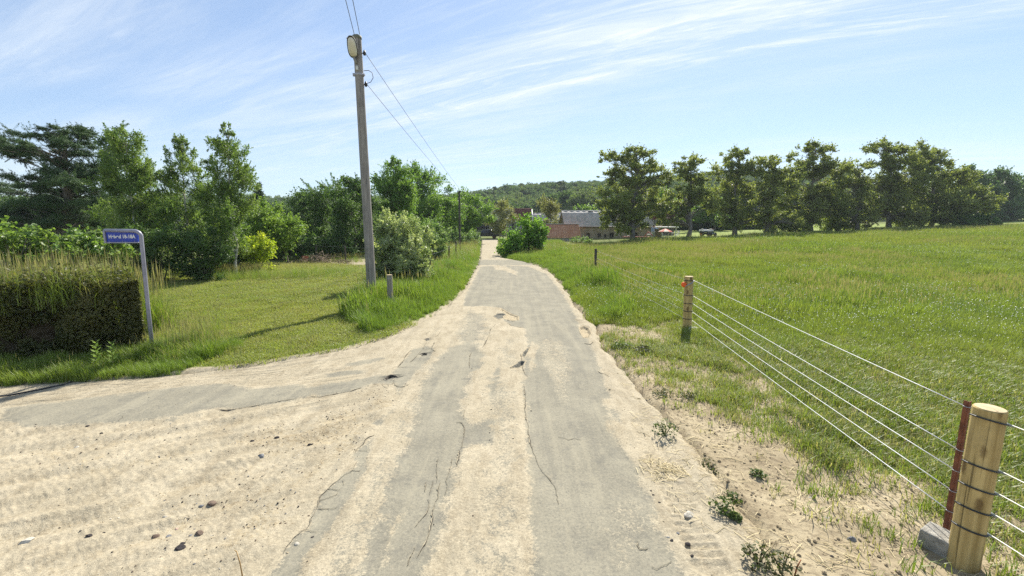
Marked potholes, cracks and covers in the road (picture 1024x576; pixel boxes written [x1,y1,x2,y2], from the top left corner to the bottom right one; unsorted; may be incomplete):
crack [521,356,559,503]
pothole [578,325,592,338]
crack [407,412,465,565]
pothole [499,308,519,321]
crack [284,435,374,551]
